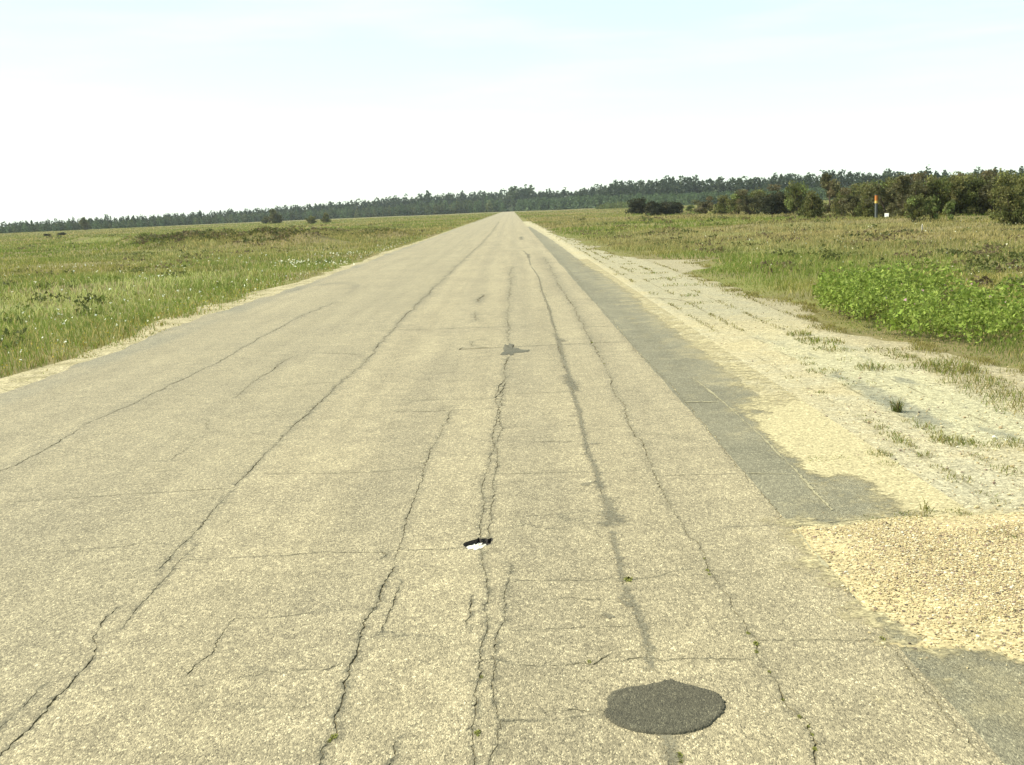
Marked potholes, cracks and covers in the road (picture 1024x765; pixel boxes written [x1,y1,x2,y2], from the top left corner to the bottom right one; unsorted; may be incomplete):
crack [171,257,898,765]
pothole [463,538,493,550]
